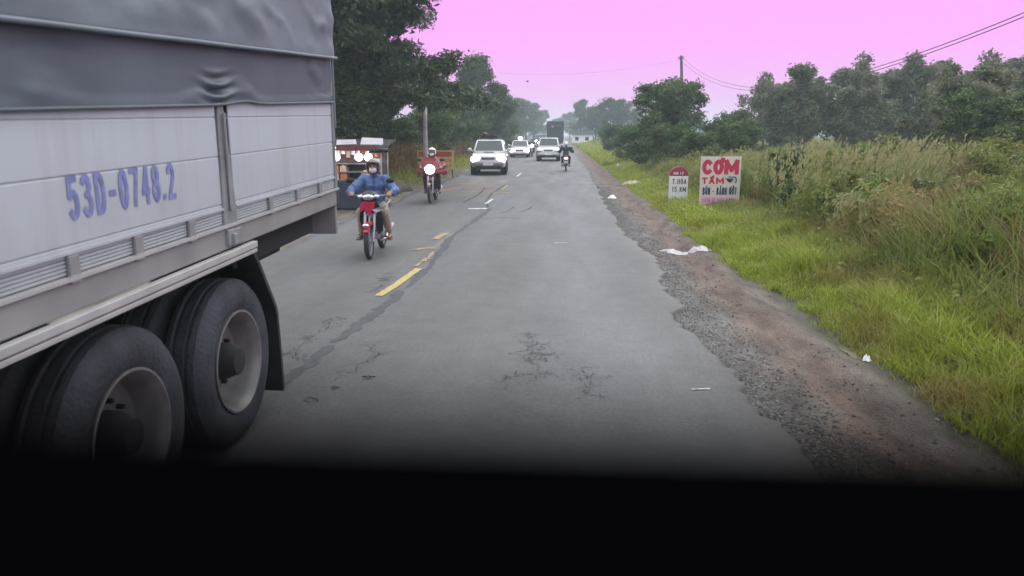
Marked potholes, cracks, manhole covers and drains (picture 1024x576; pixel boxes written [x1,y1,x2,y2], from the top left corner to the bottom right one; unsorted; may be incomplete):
crack [282,316,347,360]
crack [334,340,391,381]
crack [495,331,566,389]
crack [463,188,531,219]
